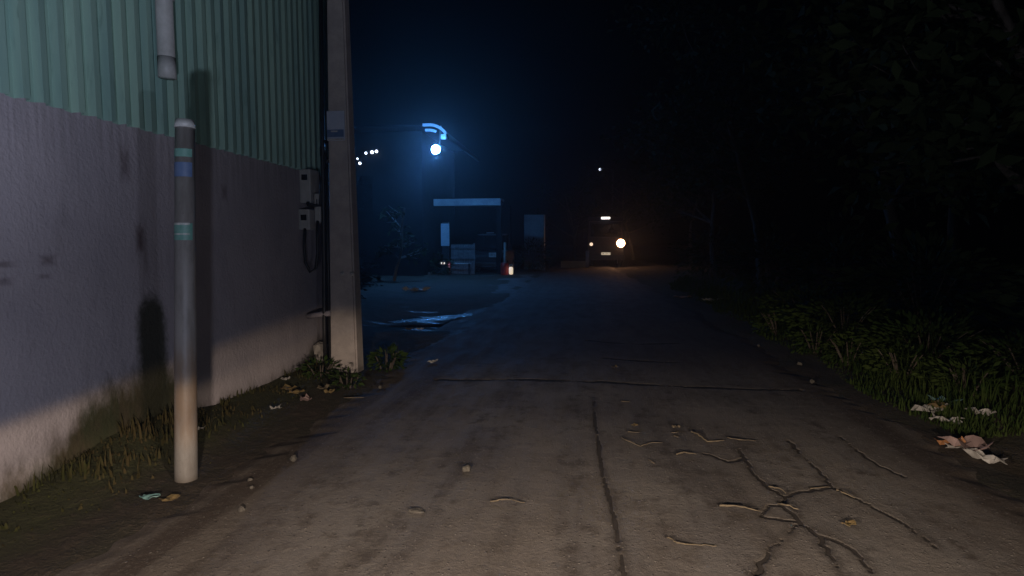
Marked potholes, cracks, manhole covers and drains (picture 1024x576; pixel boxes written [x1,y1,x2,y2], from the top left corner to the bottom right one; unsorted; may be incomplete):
crack [704,437,937,575]
